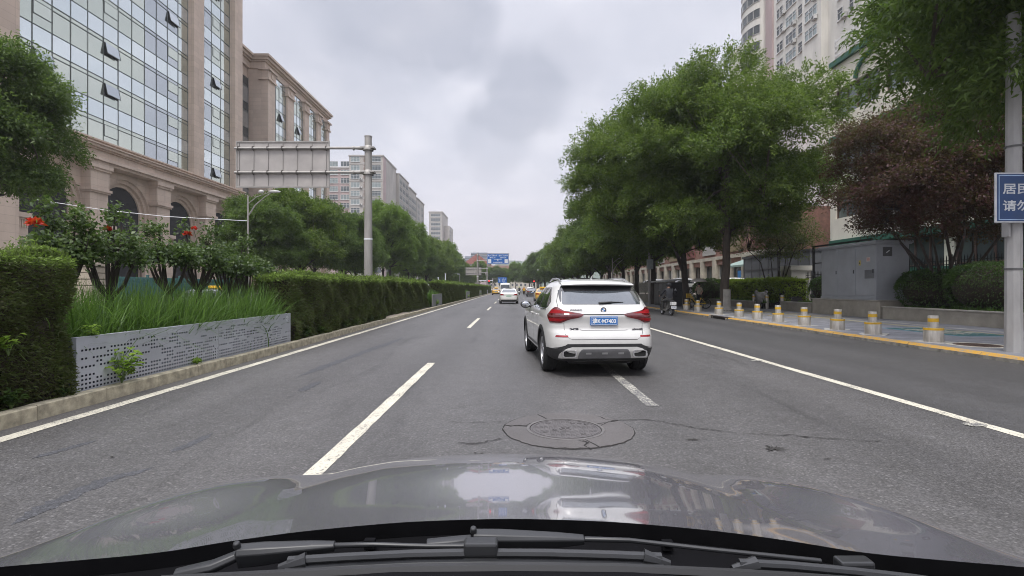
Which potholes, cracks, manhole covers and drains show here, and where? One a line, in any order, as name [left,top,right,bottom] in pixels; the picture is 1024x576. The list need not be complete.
crack [599,416,837,439]
manhole cover [502,413,635,449]
